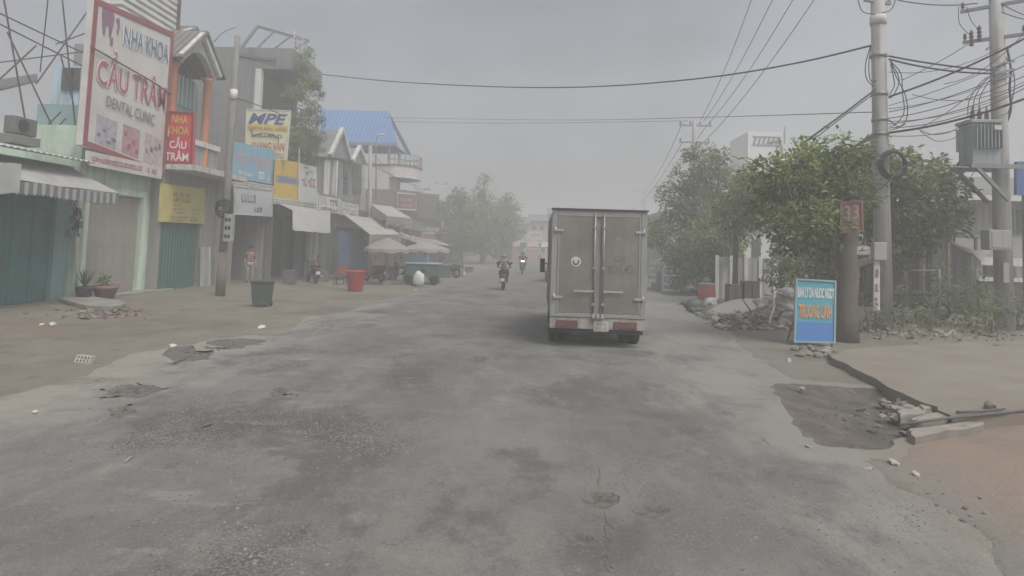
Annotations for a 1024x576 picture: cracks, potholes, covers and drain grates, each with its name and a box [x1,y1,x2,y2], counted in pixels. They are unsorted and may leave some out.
pothole [192,338,275,352]
crack [603,511,614,574]
pothole [612,498,690,527]
pothole [152,344,226,366]
pothole [564,485,639,517]
pothole [90,382,178,401]
pothole [753,379,933,461]
pothole [256,385,299,400]
